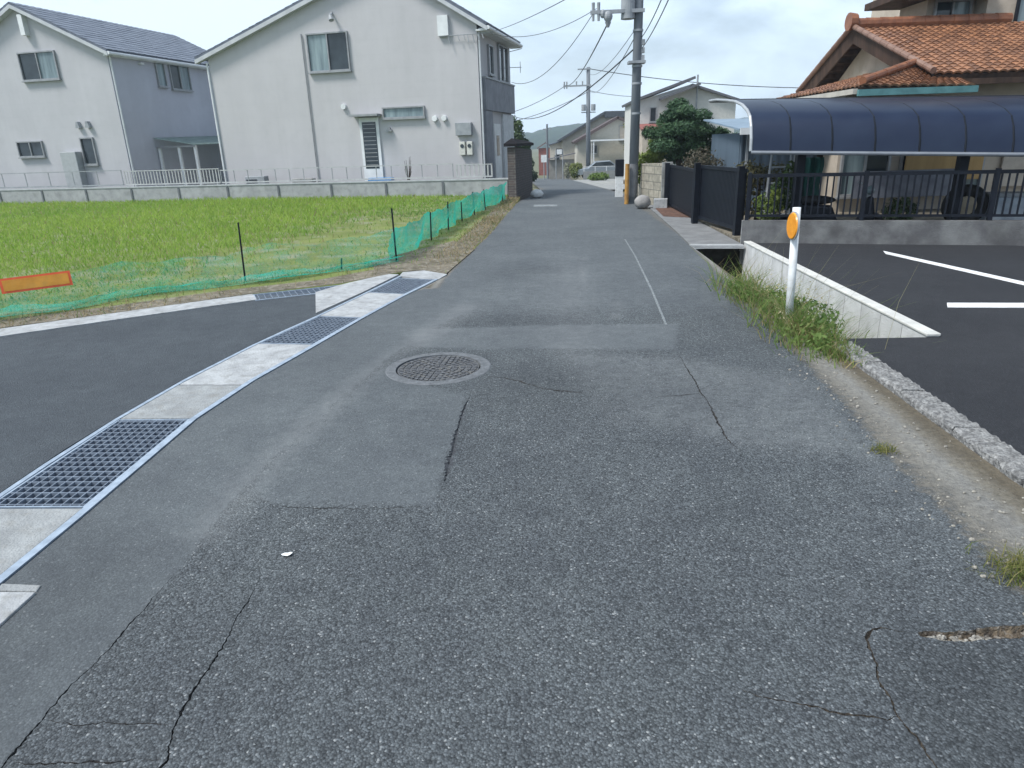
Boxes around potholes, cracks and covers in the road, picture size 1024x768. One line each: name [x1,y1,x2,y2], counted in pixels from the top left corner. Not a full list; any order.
pothole [918,625,1024,642]
drain grate [260,316,360,345]
drain grate [0,419,189,509]
crack [487,376,580,393]
drain grate [253,285,338,301]
drain grate [369,278,434,294]
crack [657,355,737,448]
crack [14,577,260,768]
crack [743,627,938,768]
manhole cover [385,352,491,385]
